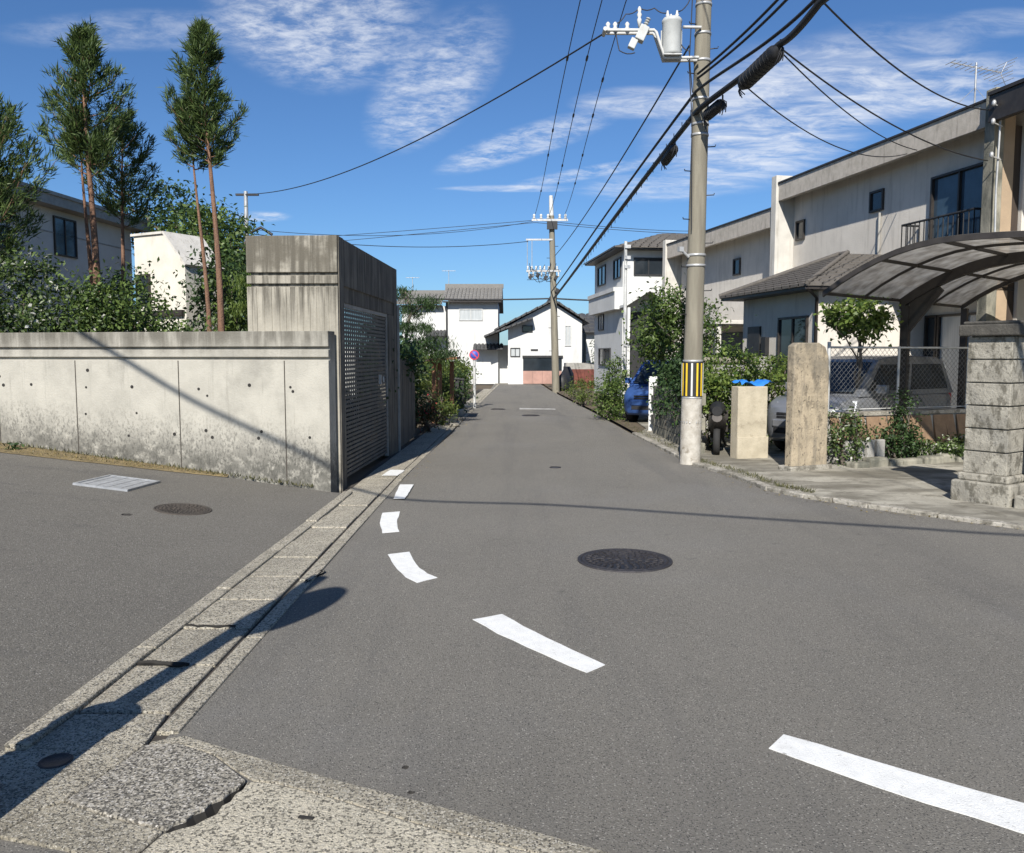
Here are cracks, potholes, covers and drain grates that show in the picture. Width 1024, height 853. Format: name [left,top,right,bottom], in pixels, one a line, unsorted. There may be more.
crack [166,783,246,833]
manhole cover [577,548,673,573]
manhole cover [153,503,212,515]
drain grate [73,474,160,492]
